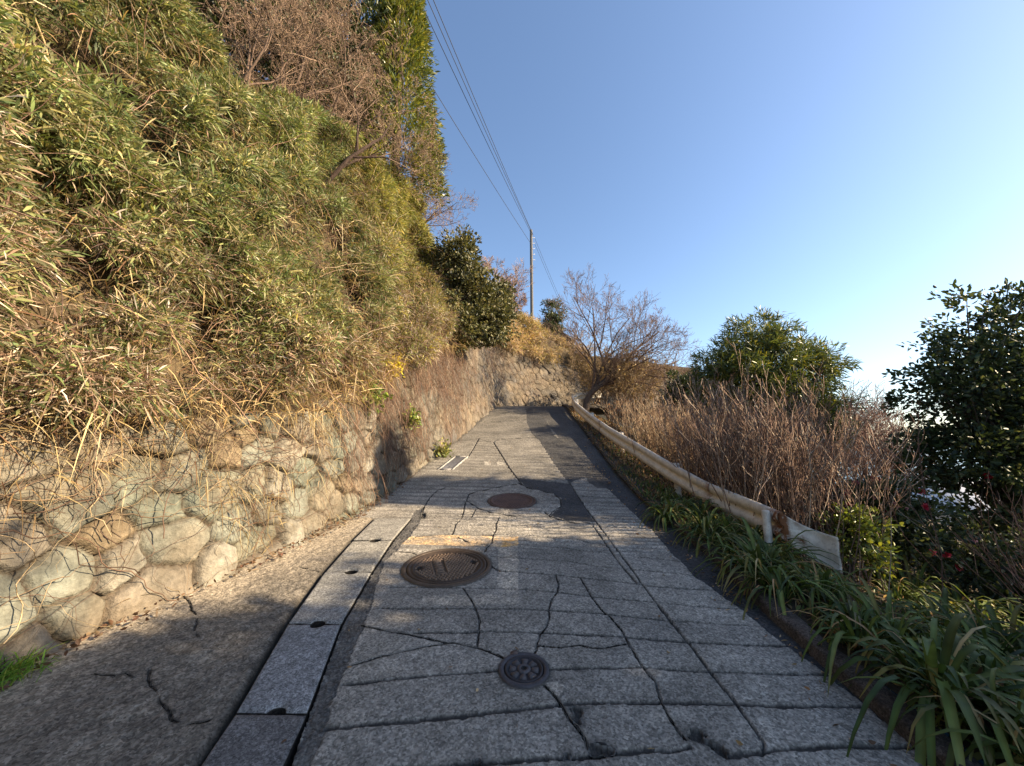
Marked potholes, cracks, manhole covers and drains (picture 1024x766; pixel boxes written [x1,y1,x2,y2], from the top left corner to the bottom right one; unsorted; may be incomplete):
pothole [686,728,728,760]
crack [533,574,687,741]
crack [346,588,505,669]
manhole cover [488,493,536,509]
drain grate [437,456,469,470]
manhole cover [401,548,492,588]
crack [544,685,588,751]
crack [87,668,211,725]
crack [452,442,583,570]
manhole cover [499,650,549,689]
crack [183,596,199,637]
